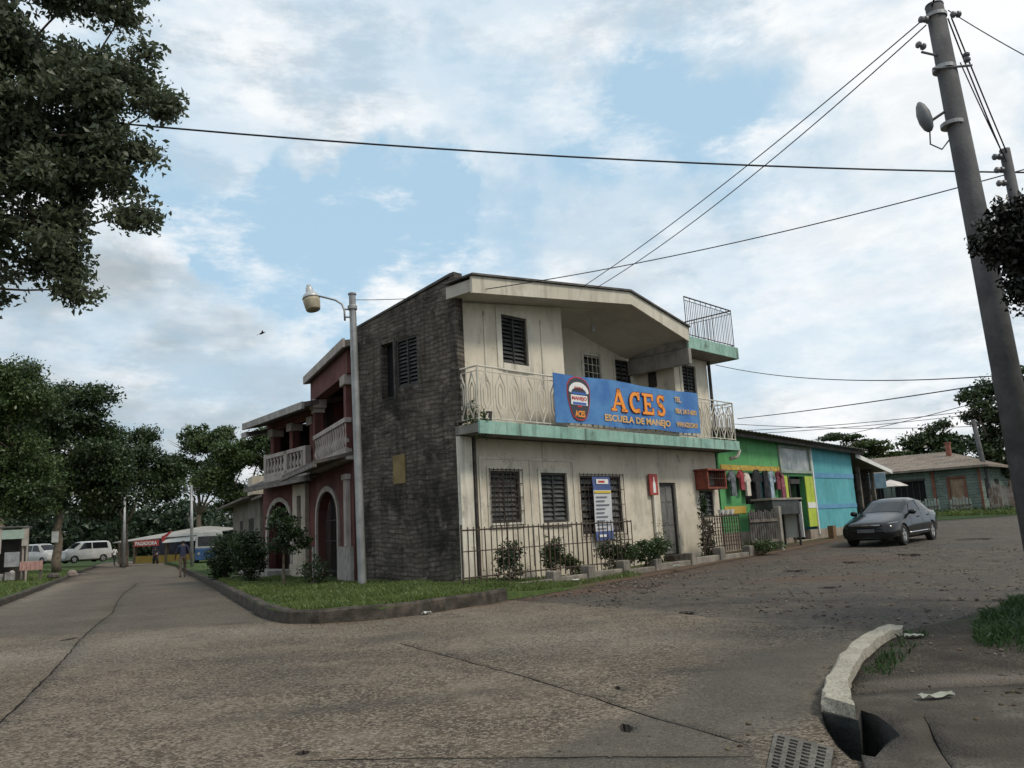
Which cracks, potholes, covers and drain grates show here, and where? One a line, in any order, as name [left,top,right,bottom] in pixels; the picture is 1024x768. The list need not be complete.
crack [924,718,952,768]
crack [0,583,137,723]
drain grate [766,732,834,768]
